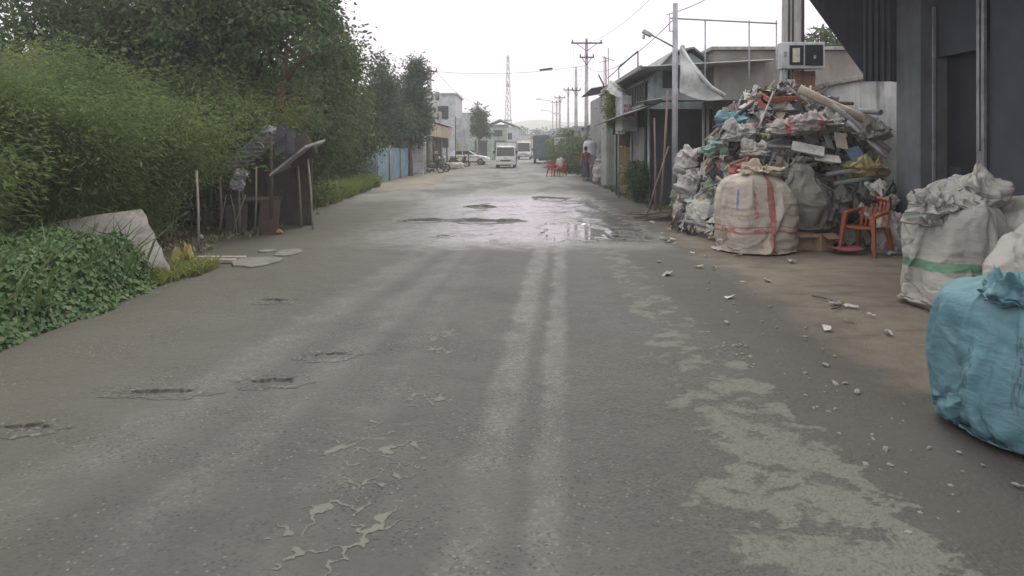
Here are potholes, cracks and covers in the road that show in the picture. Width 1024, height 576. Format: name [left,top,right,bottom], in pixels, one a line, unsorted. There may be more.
pothole [96,386,226,400]
crack [265,420,434,576]
pothole [229,374,317,390]
pothole [292,348,372,363]
pothole [0,417,74,439]
